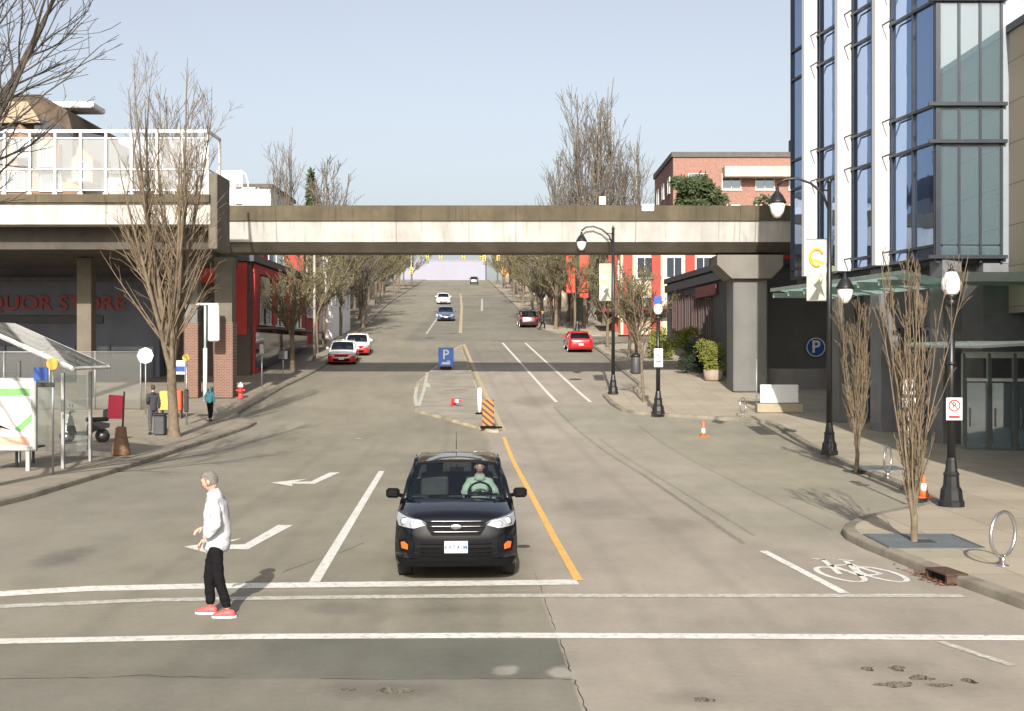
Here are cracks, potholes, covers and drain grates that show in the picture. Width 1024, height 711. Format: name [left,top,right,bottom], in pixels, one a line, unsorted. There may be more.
crack [534,573,571,671]
drain grate [925,566,968,586]
